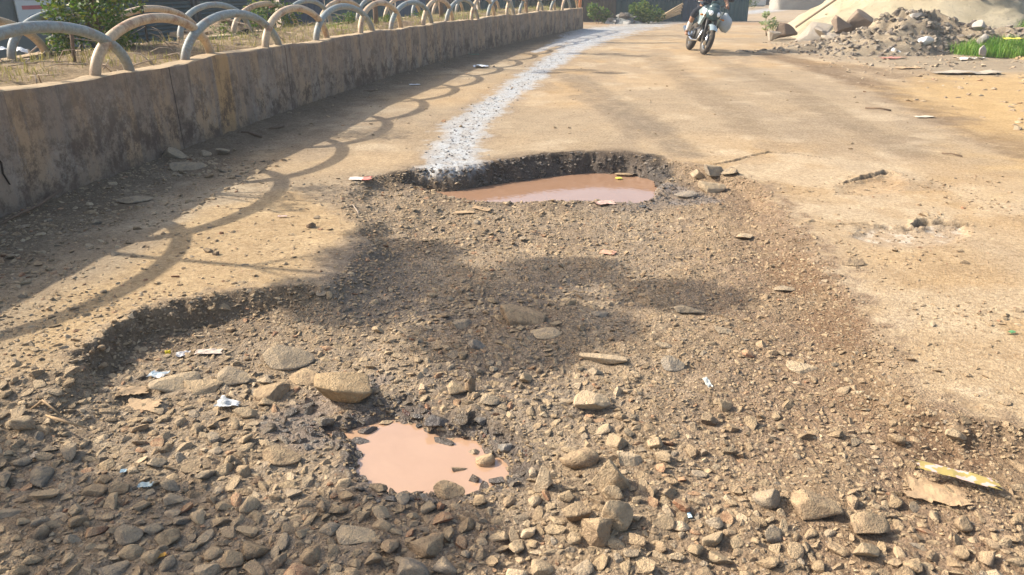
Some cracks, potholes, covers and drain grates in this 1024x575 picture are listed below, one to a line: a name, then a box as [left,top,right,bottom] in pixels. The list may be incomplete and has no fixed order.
pothole [0,153,1024,575]
